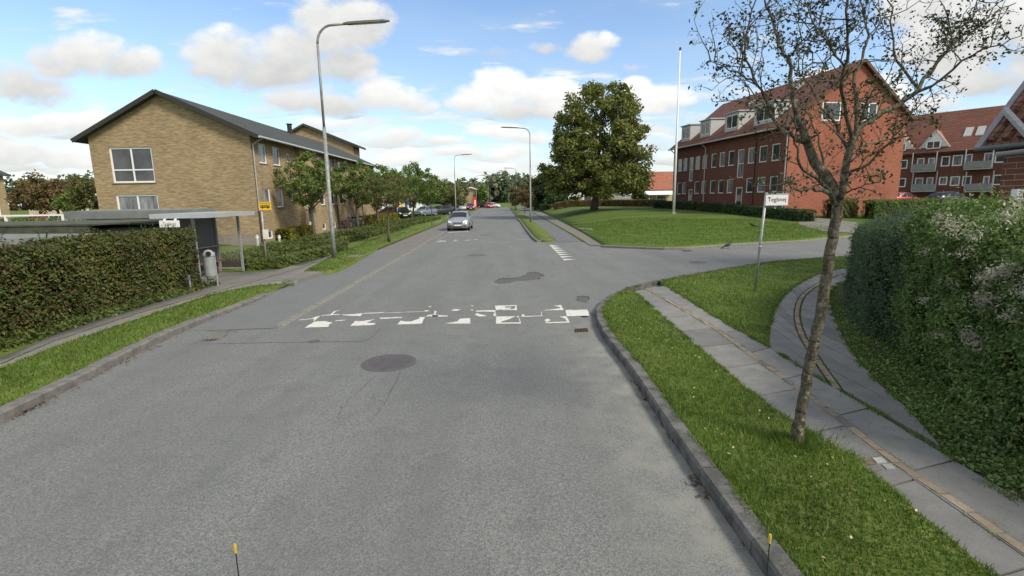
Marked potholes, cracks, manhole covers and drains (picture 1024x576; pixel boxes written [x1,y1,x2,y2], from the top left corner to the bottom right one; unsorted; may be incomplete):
crack [337,371,401,421]
manhole cover [360,354,417,372]
